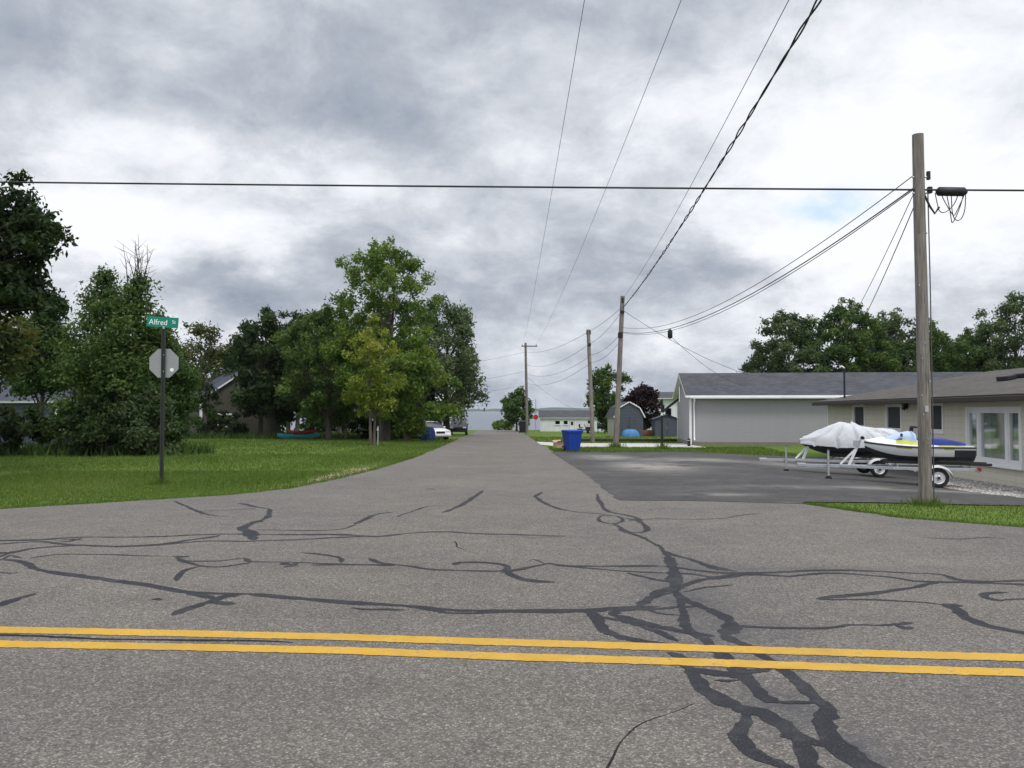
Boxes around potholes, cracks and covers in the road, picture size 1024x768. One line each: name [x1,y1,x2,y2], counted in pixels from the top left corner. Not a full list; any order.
crack [606,703,693,768]
